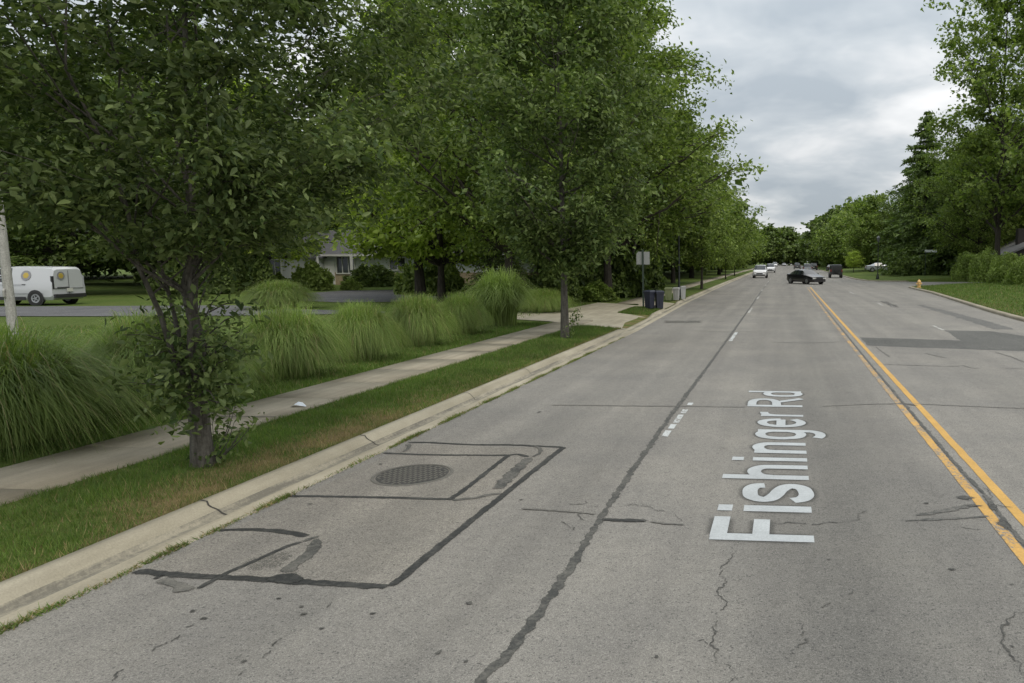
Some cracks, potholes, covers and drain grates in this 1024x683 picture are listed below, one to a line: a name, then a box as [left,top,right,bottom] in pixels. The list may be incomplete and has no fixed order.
crack [700,549,736,681]
manhole cover [370,464,454,486]
crack [1000,612,1022,673]
